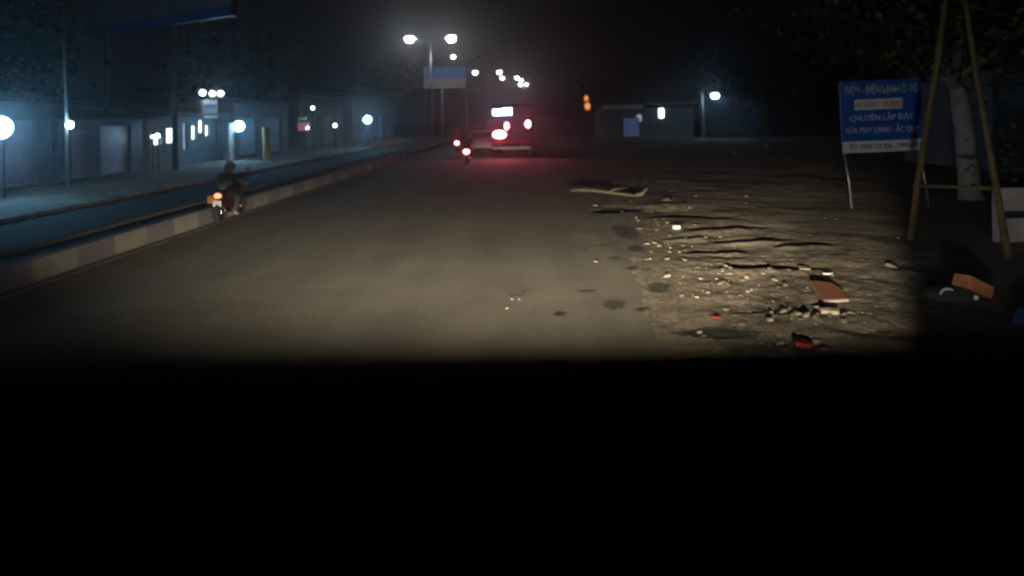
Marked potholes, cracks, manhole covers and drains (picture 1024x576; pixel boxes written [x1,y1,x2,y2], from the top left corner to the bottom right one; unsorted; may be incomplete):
pothole [642,279,681,295]
pothole [610,220,647,243]
